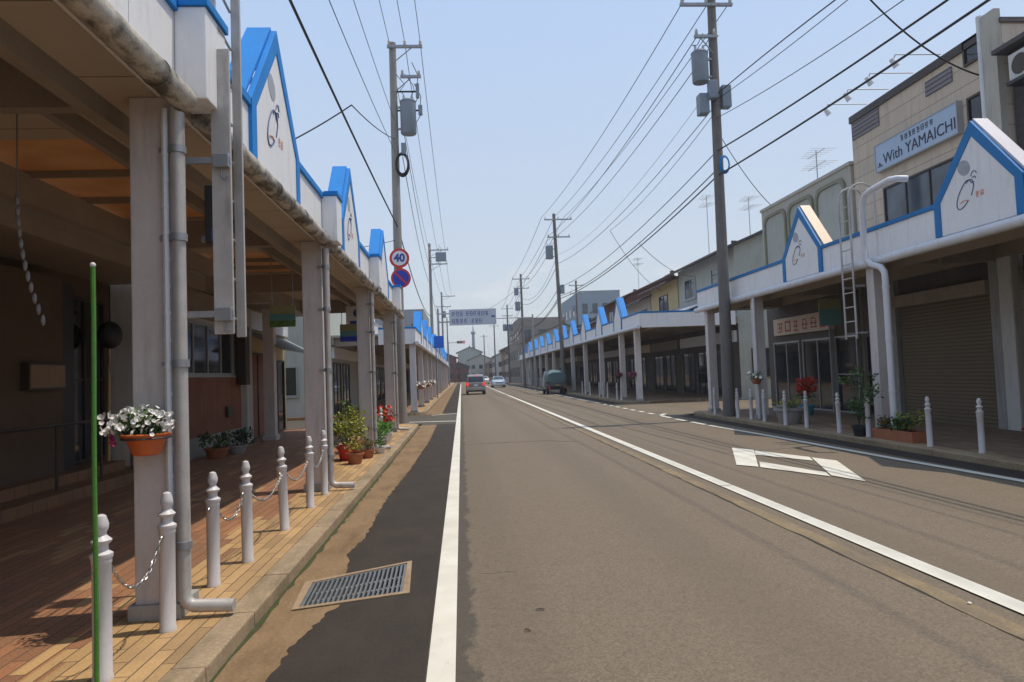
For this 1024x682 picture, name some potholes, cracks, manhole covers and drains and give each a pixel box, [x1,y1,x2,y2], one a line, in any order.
drain grate [291,561,412,611]
